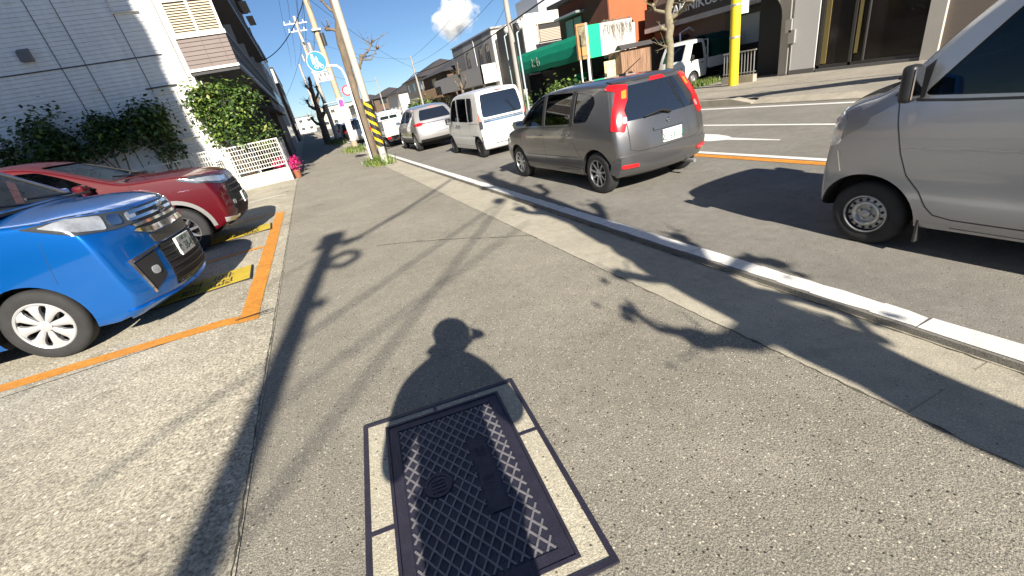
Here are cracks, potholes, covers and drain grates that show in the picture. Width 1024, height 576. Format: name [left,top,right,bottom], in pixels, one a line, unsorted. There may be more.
manhole cover [363,378,620,576]
